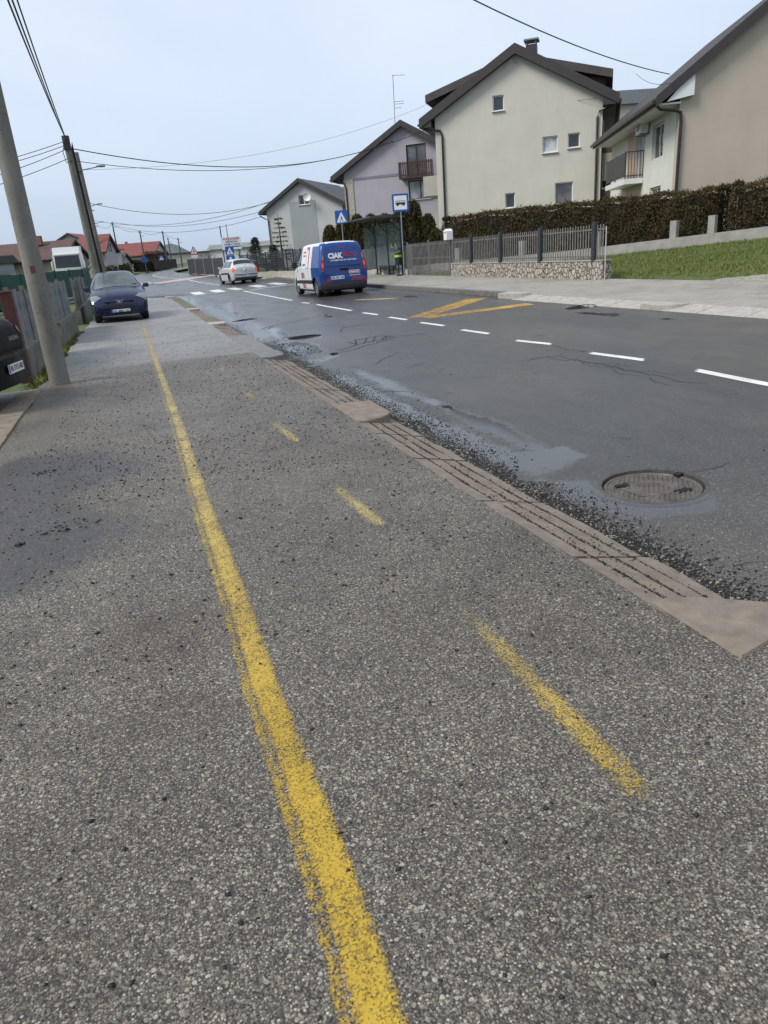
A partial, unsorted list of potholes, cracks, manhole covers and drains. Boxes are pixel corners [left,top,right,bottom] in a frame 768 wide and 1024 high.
manhole cover [597,469,710,504]
crack [439,353,708,386]
crack [263,315,425,371]
